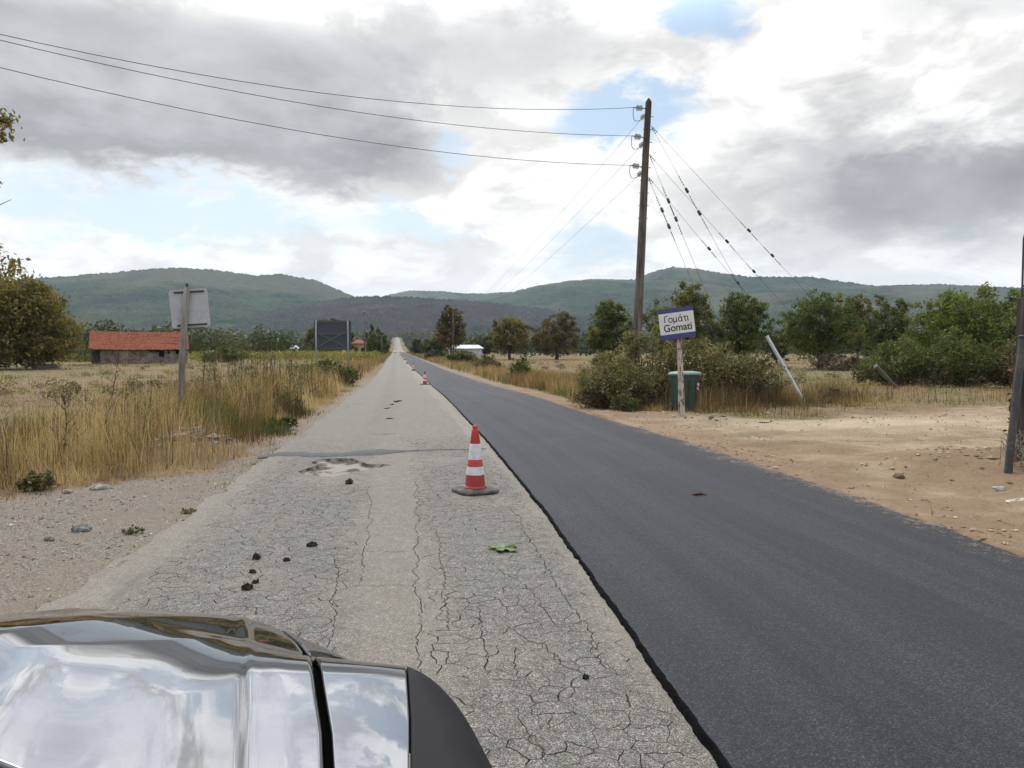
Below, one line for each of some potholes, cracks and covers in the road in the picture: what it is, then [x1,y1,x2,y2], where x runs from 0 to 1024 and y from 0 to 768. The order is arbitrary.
crack [116,434,699,768]
pothole [298,458,391,477]
